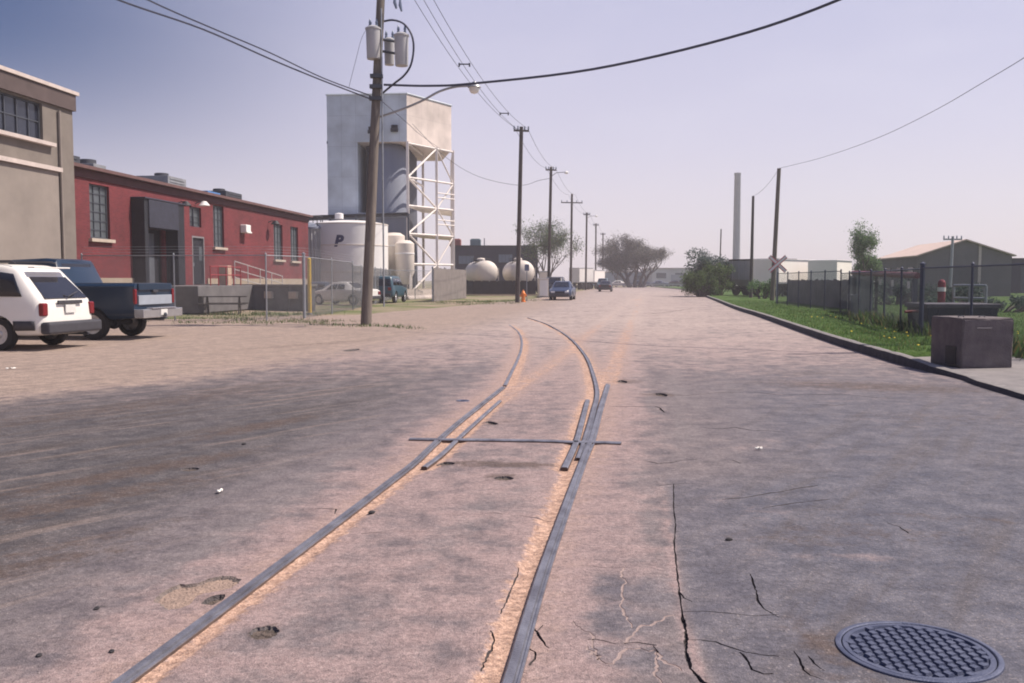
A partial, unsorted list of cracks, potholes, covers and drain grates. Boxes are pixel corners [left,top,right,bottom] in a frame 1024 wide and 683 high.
crack [729,485,828,508]
manhole cover [835,621,1005,683]
pothole [154,576,242,610]
pothole [249,626,280,640]
crack [572,483,779,683]
crack [794,651,825,680]
crack [480,568,549,673]
